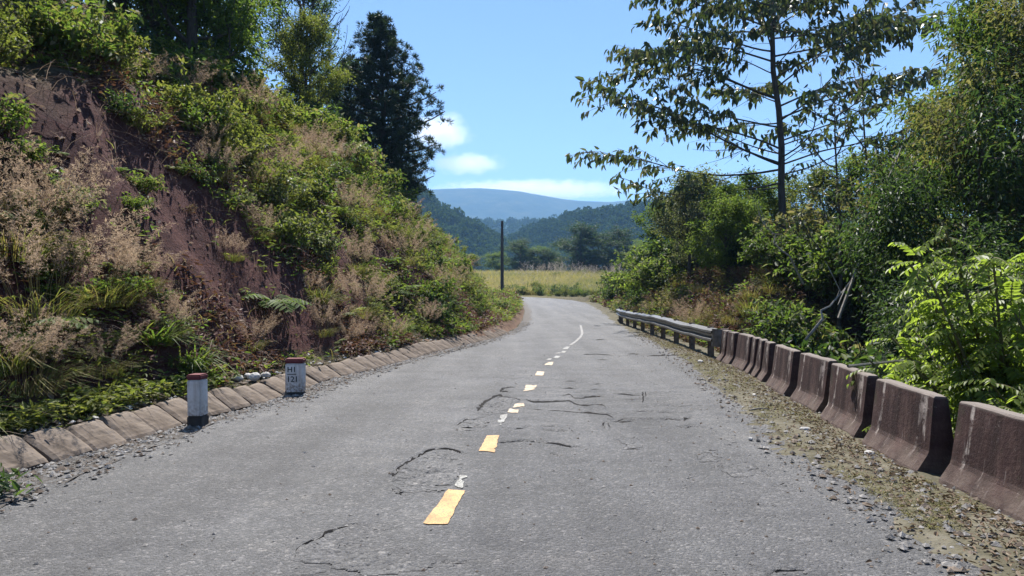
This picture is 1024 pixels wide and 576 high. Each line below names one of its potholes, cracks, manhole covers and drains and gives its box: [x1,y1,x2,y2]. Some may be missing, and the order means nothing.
crack [295,526,348,557]
crack [392,383,703,495]
